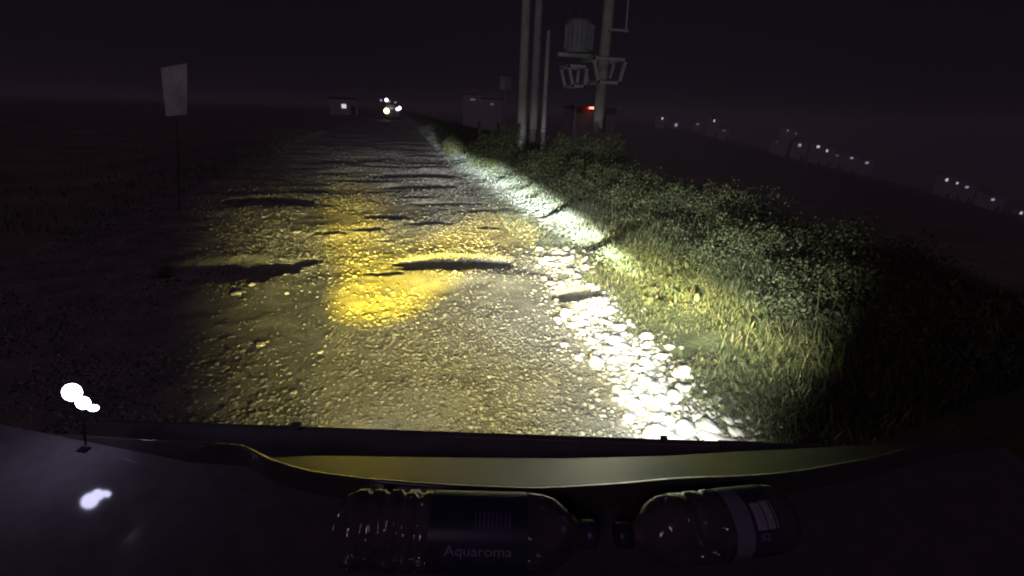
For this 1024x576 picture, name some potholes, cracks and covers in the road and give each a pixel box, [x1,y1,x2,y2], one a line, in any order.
pothole [150,254,302,284]
pothole [295,257,322,269]
pothole [551,286,596,302]
pothole [216,193,327,206]
pothole [388,252,519,271]
